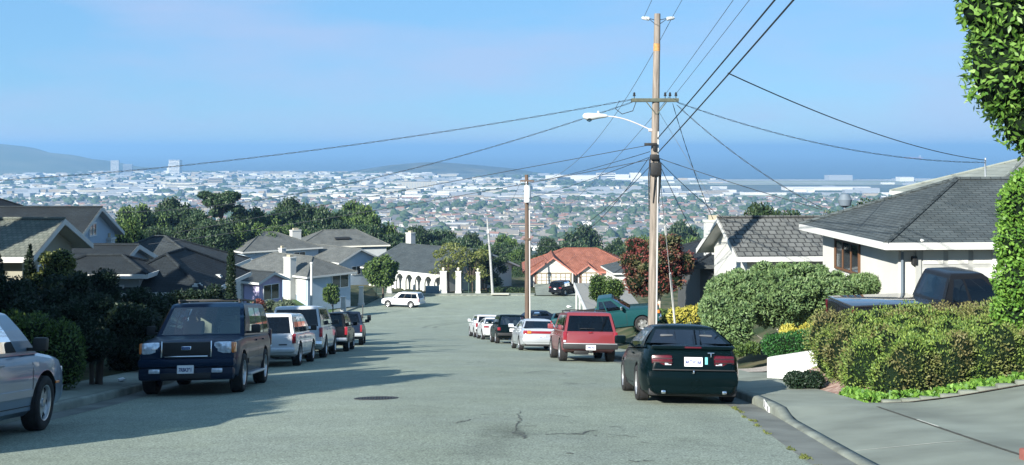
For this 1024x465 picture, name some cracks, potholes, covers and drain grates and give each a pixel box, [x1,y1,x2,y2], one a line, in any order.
crack [511,411,648,443]
